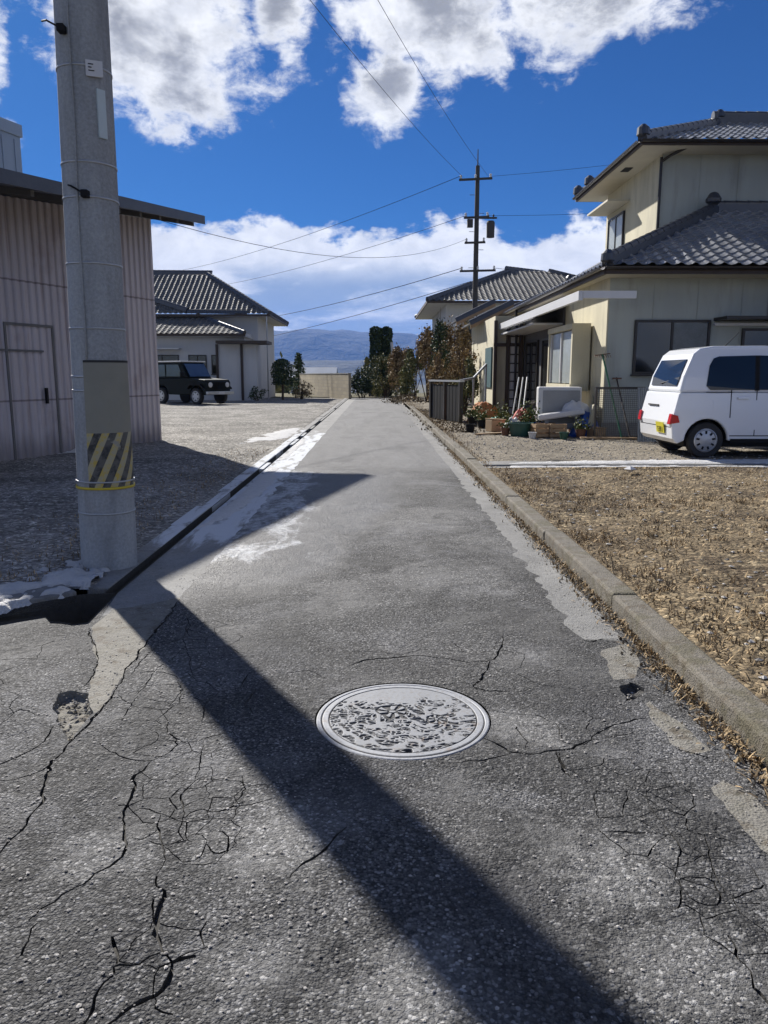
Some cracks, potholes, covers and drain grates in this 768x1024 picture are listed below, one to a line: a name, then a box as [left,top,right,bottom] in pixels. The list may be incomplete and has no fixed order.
crack [0,599,272,1024]
pothole [619,682,645,701]
crack [289,827,346,878]
crack [344,637,574,692]
manhole cover [315,684,491,760]
pothole [52,690,93,741]
crack [455,710,768,1004]
